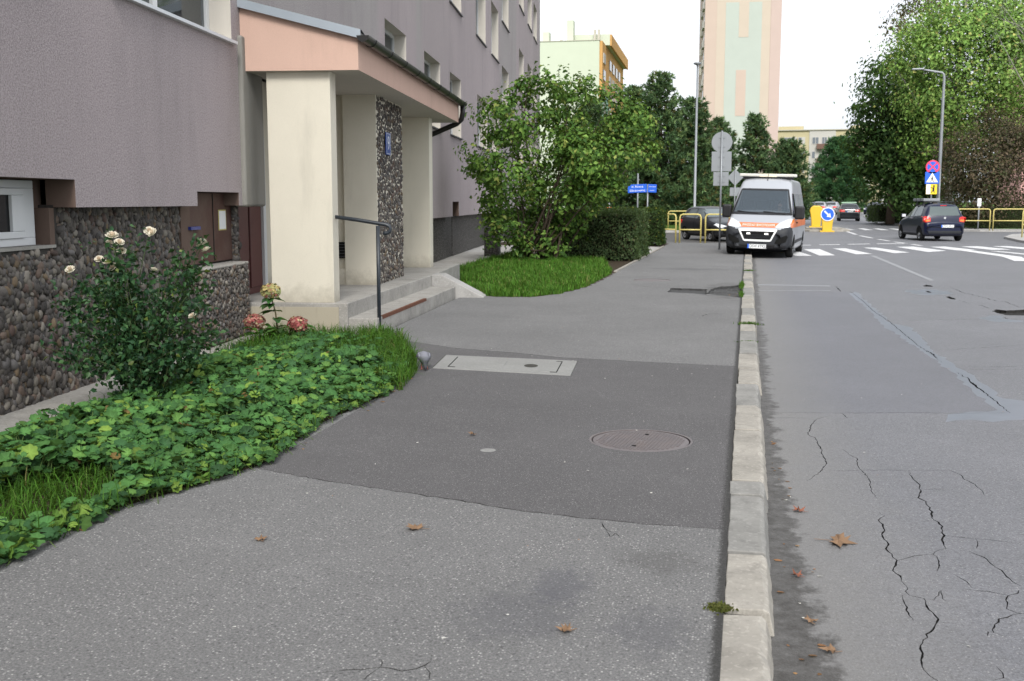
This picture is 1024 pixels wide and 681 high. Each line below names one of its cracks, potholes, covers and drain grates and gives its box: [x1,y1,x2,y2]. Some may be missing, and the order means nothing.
crack [317,660,436,680]
manhole cover [589,429,693,452]
utility cover [433,355,577,376]
crack [846,456,1022,681]
crack [807,416,827,480]
